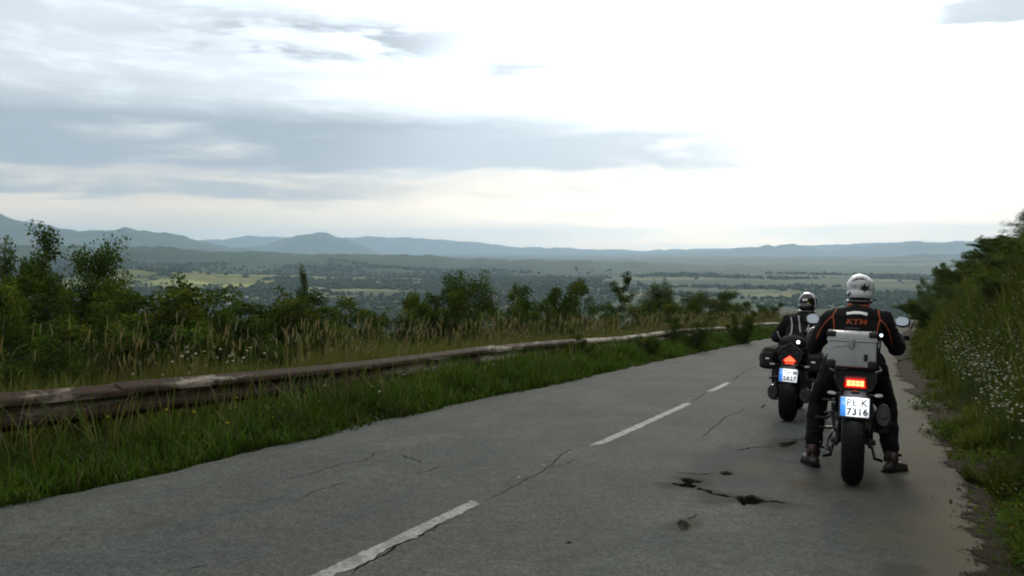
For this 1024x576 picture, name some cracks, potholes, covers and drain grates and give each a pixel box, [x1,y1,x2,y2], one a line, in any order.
crack [284,450,444,497]
pothole [734,494,771,506]
pothole [676,519,692,531]
crack [489,447,579,499]
pothole [672,478,703,489]
